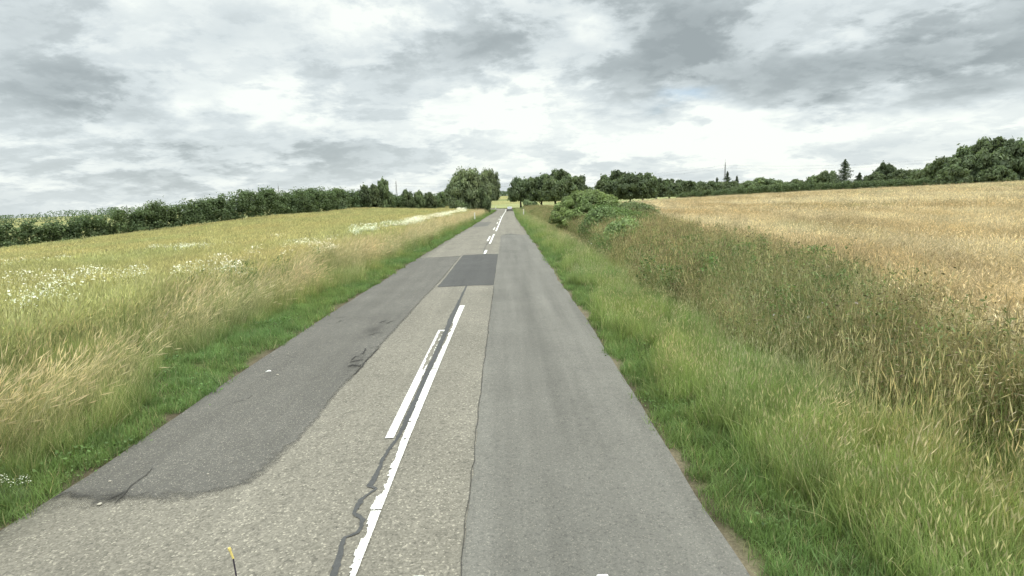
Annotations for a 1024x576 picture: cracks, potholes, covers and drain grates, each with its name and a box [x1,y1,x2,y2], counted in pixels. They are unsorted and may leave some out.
crack [346,320,392,376]
